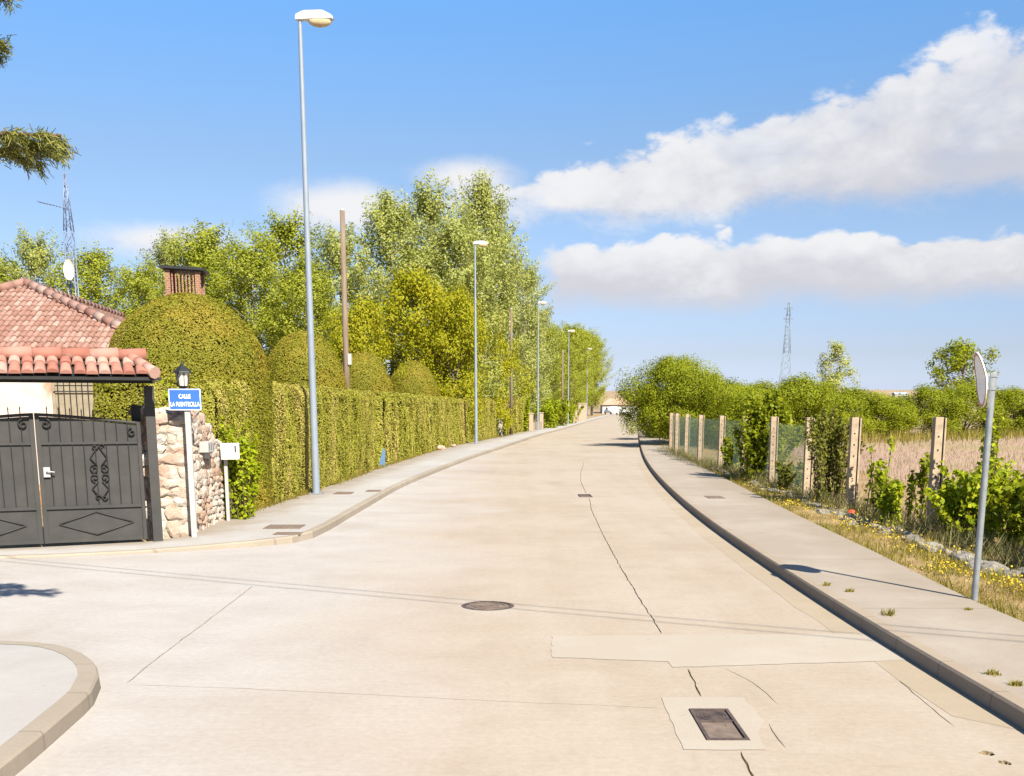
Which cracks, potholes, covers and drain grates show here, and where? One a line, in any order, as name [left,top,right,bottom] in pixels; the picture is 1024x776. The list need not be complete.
crack [733,672,785,776]
manhole cover [461,601,514,611]
manhole cover [689,708,750,740]
crack [580,463,662,634]
